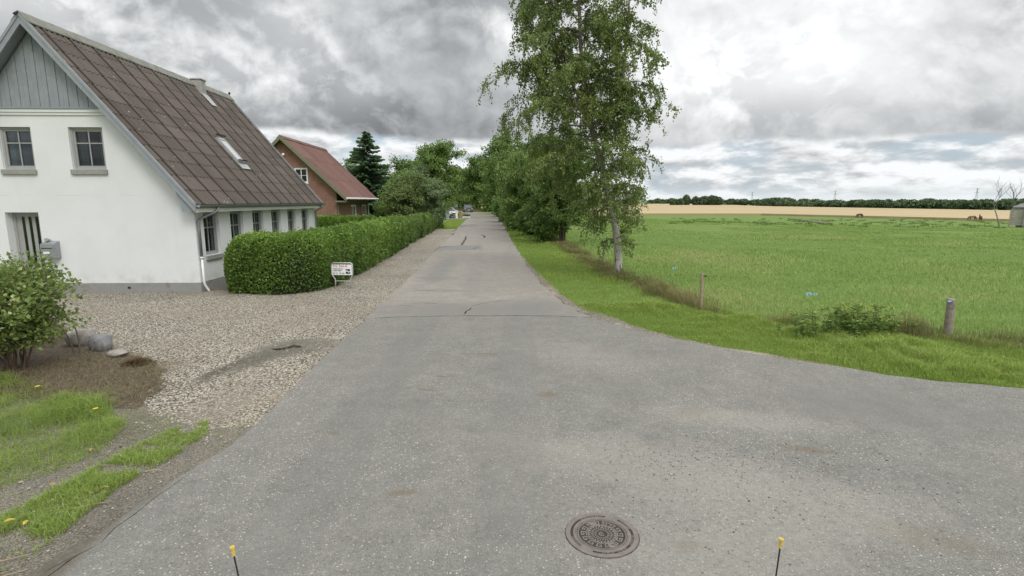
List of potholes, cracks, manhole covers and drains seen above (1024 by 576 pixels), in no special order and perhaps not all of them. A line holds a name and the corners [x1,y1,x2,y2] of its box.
manhole cover [565,513,640,559]
